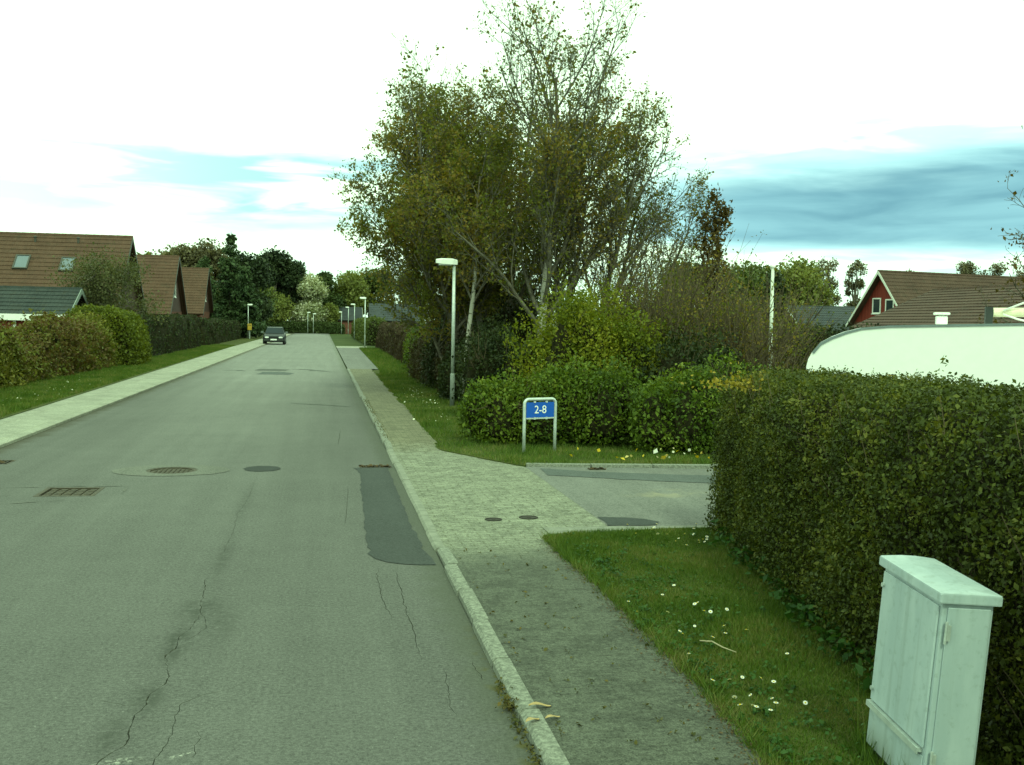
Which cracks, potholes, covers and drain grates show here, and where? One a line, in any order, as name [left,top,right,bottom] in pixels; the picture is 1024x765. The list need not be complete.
crack [96,474,259,765]
